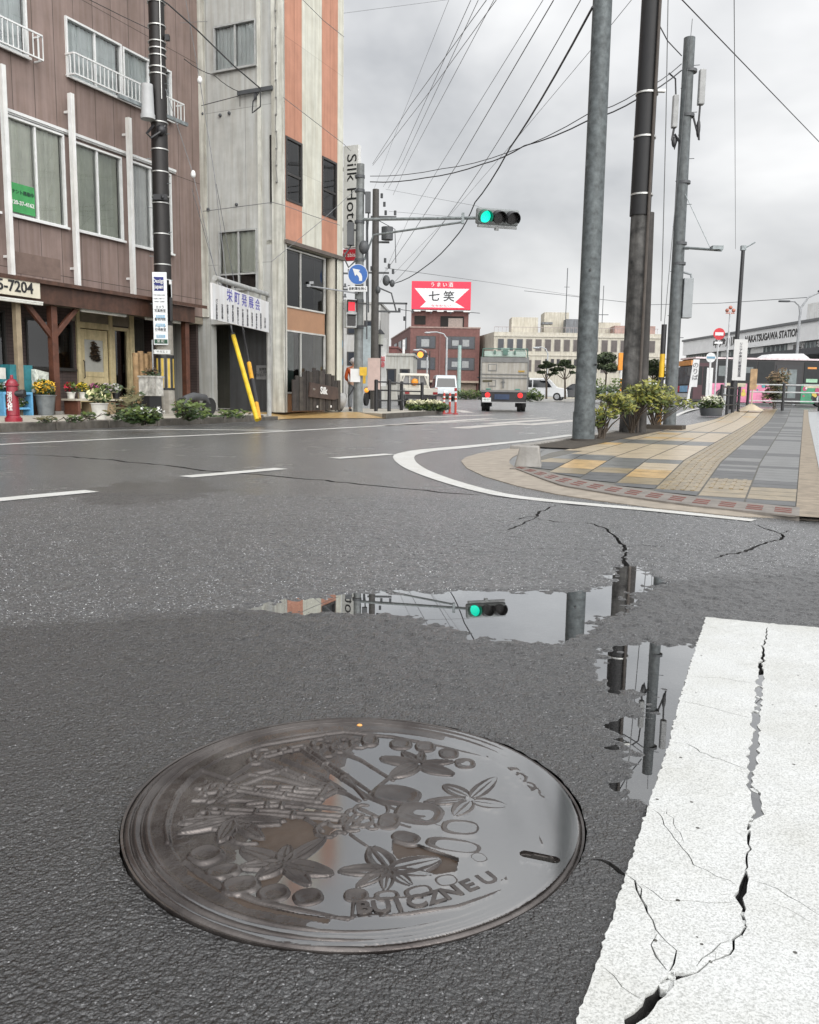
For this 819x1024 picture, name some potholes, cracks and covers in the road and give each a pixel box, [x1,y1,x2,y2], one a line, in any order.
crack [717,525,787,558]
crack [9,454,528,500]
crack [508,506,651,566]
manhole cover [119,717,597,955]
crack [597,629,767,1024]
